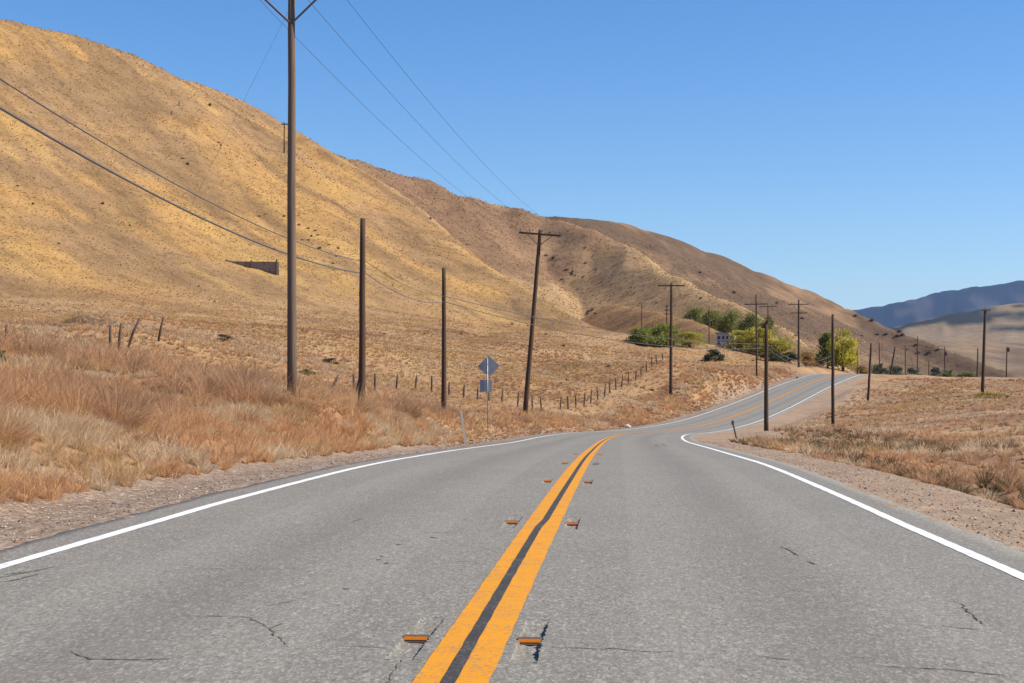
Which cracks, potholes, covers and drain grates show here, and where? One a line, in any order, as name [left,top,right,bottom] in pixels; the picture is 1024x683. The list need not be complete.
crack [864,657,1009,676]
crack [185,600,293,644]
